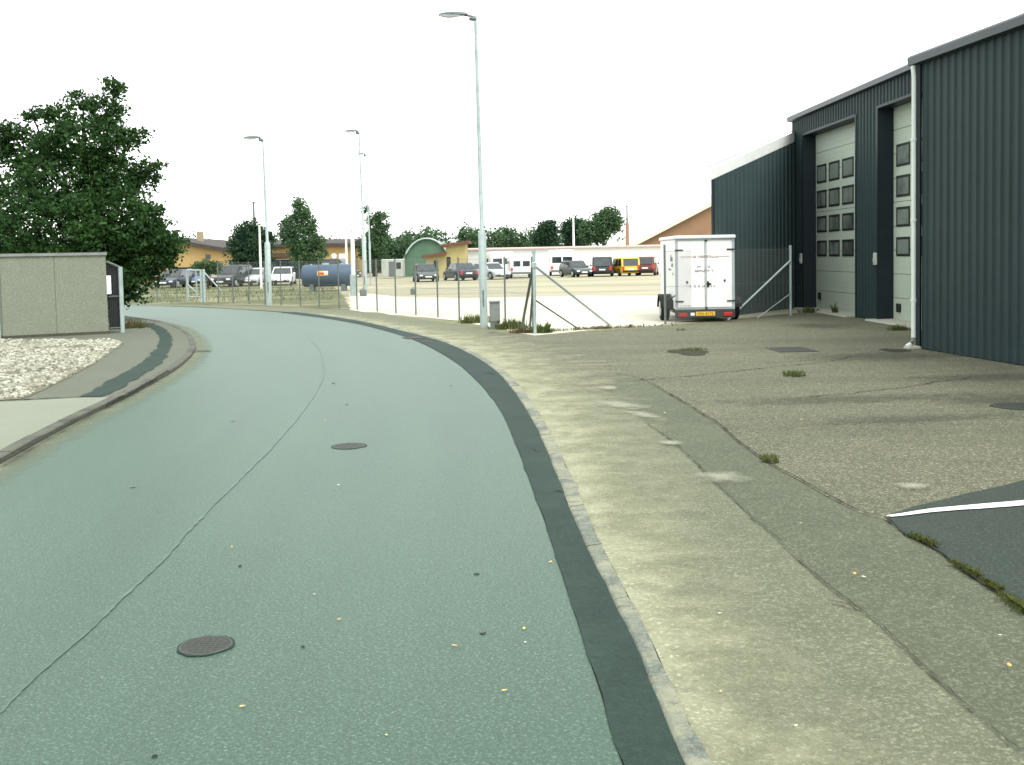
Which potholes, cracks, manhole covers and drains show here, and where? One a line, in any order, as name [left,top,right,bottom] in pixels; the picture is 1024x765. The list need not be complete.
manhole cover [177,635,235,657]
